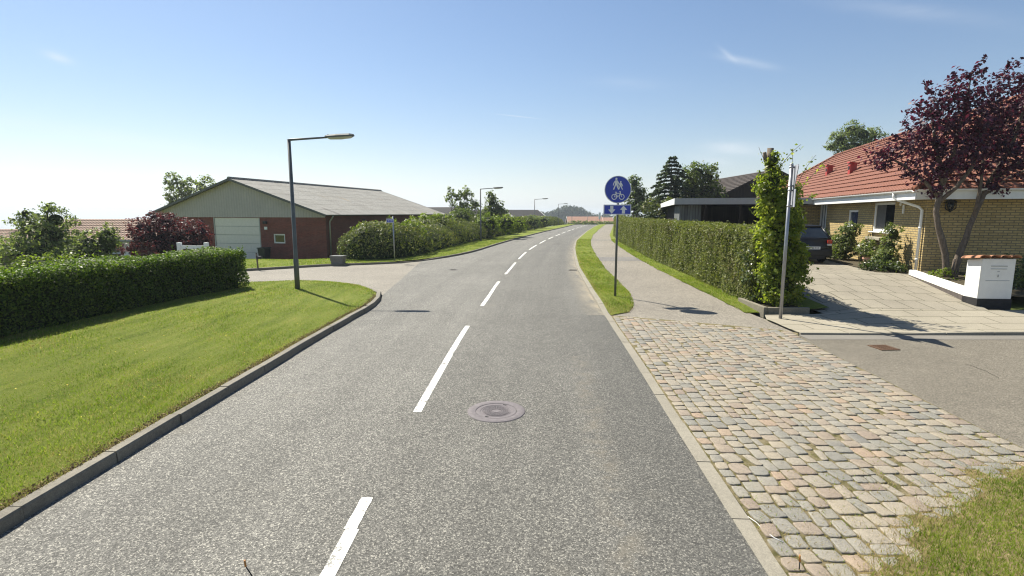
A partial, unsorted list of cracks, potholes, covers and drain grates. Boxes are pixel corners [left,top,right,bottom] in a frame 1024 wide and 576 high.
manhole cover [467,401,525,423]
